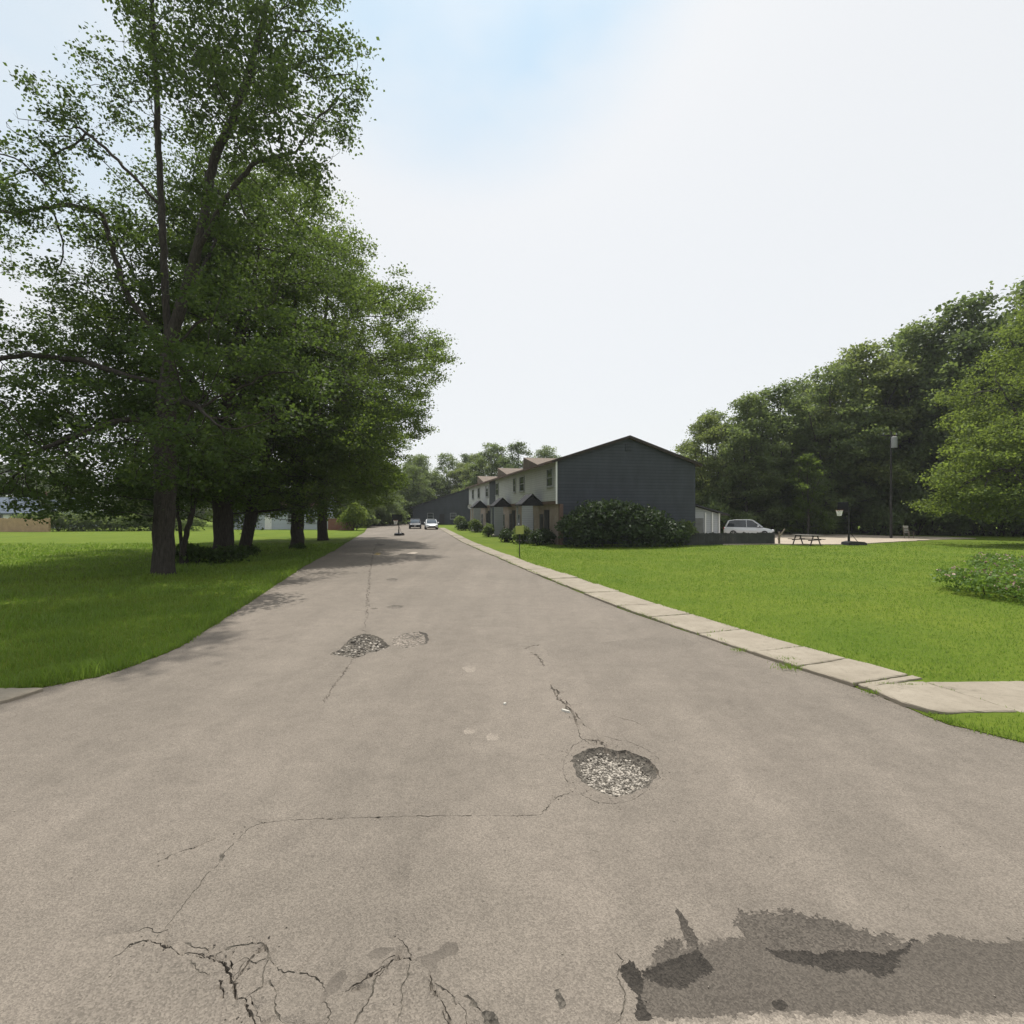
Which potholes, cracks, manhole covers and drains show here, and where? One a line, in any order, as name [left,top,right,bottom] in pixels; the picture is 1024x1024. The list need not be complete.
pothole [331,634,390,658]
crack [114,685,661,1024]
pothole [571,747,657,797]
